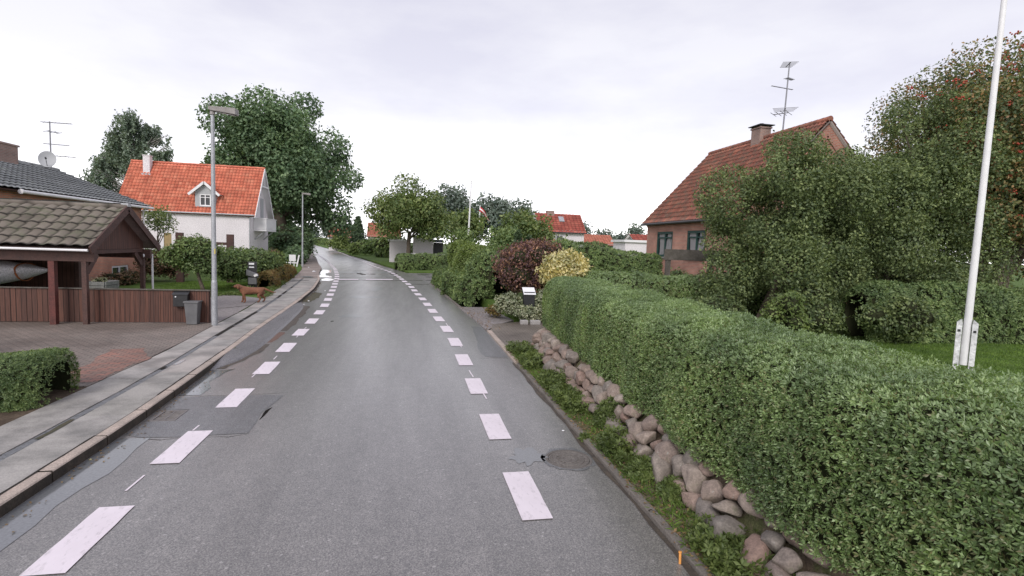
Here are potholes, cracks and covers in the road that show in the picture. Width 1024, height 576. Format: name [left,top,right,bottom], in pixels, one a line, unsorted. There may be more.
manhole cover [545,450,592,469]
